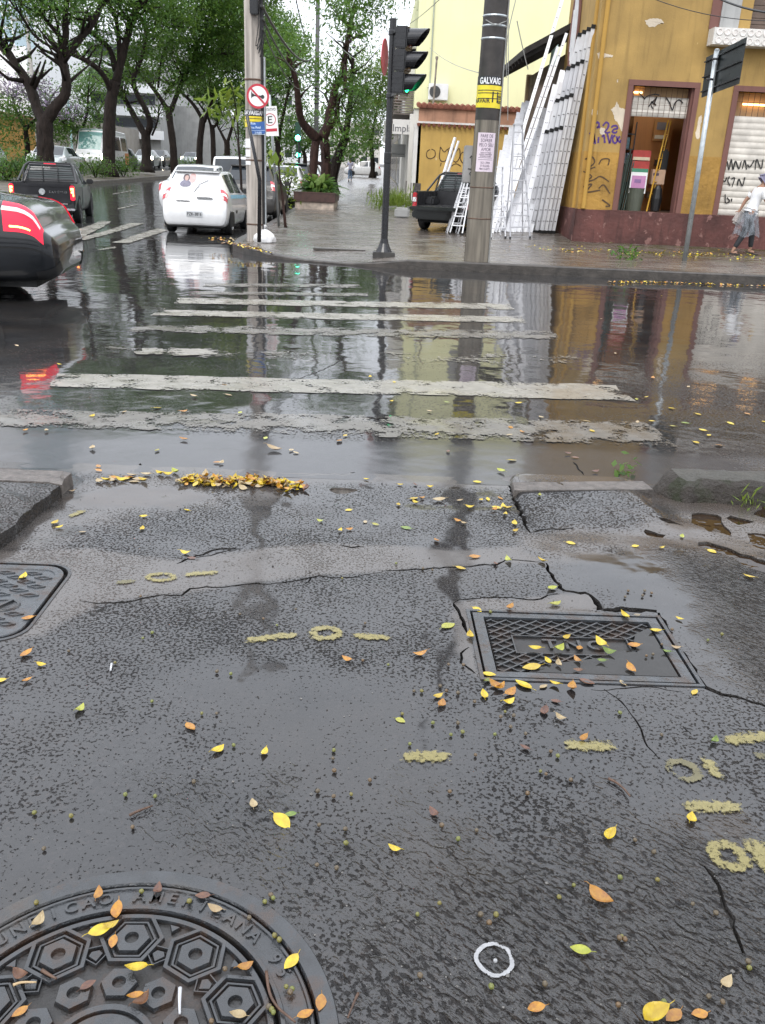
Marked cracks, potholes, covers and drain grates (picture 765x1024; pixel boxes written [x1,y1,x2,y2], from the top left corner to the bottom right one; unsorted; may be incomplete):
manhole cover [0,871,339,1024]
crack [82,548,535,604]
crack [596,686,680,759]
crack [453,594,557,674]
pothole [691,513,731,536]
